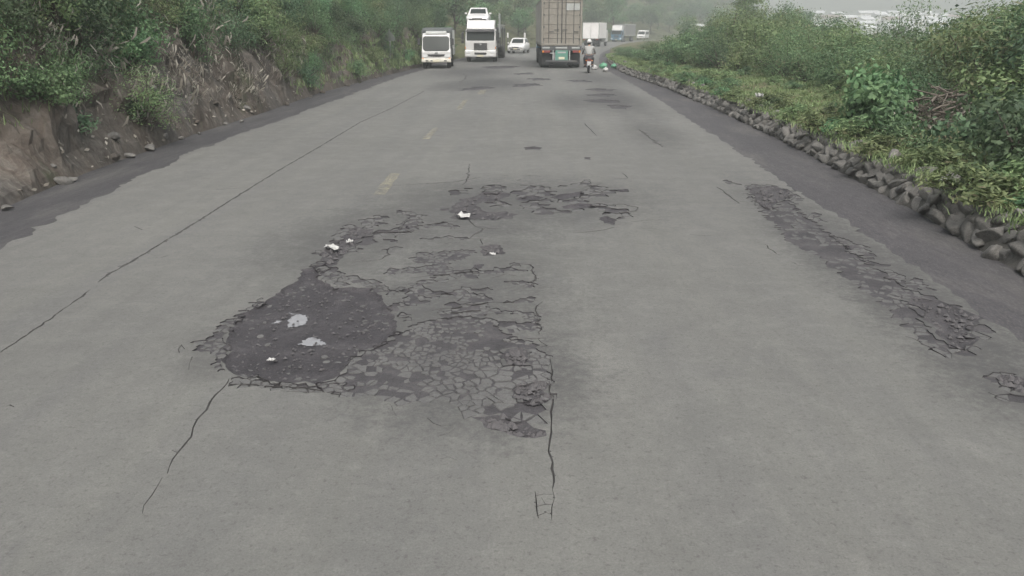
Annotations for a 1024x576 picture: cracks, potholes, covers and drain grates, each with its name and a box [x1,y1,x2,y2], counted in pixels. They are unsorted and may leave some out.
crack [534,359,556,520]
crack [717,180,1024,403]
crack [142,297,355,513]
crack [309,164,647,340]
pothole [222,266,397,385]
